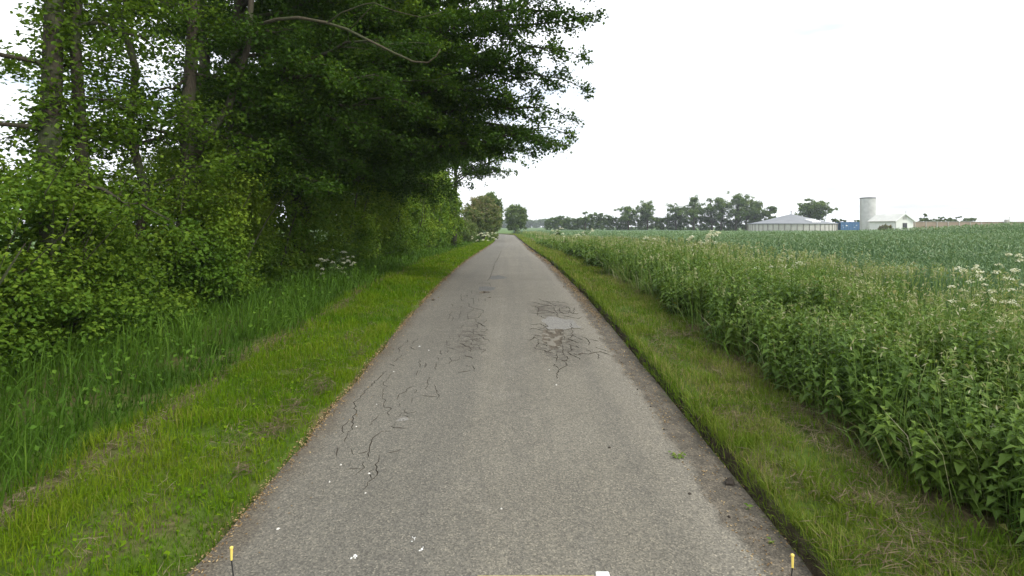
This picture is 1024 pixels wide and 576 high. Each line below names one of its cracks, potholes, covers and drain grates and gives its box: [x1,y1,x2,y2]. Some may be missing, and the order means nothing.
crack [336,292,489,492]
crack [530,298,610,378]
